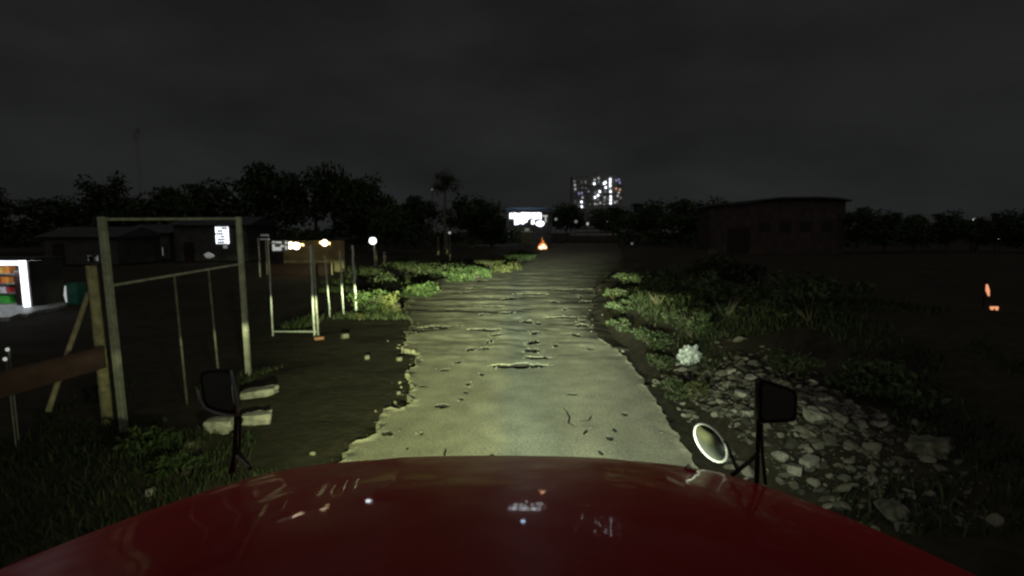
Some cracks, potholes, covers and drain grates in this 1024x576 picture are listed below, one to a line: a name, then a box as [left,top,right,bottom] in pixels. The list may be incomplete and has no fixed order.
pothole [487,361,554,369]
